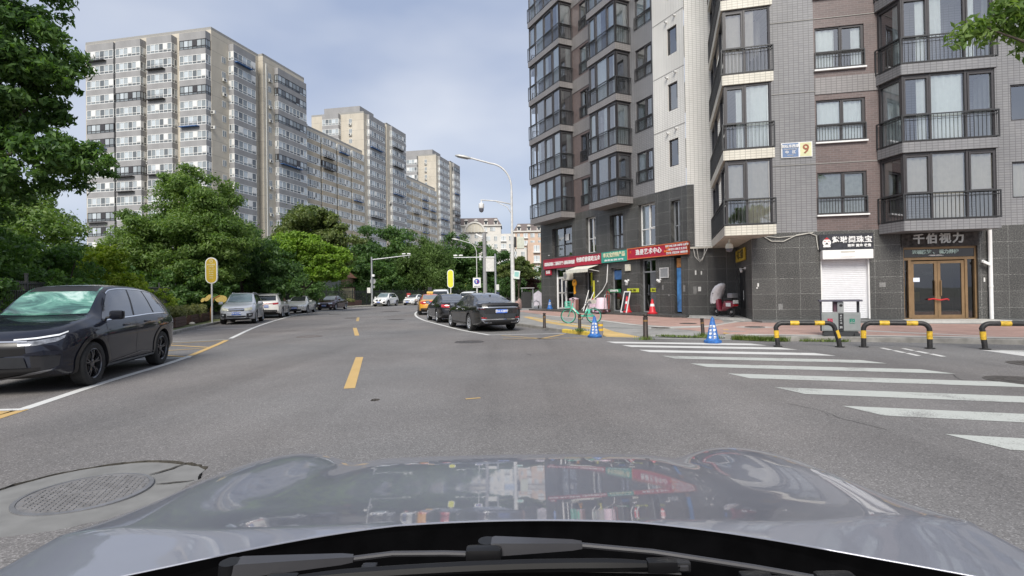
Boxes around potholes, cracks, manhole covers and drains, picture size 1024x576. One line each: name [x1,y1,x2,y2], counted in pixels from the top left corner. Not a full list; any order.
manhole cover [0,462,205,537]
